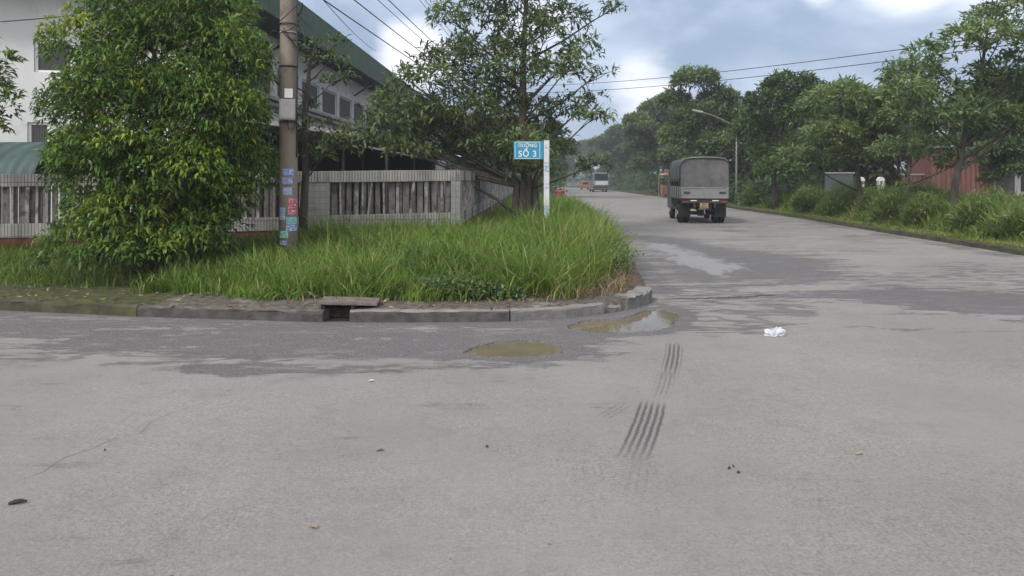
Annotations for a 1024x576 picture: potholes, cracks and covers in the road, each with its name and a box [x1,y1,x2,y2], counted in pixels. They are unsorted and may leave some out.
drain grate [319,296,381,322]
pothole [567,309,681,333]
pothole [463,340,564,357]
